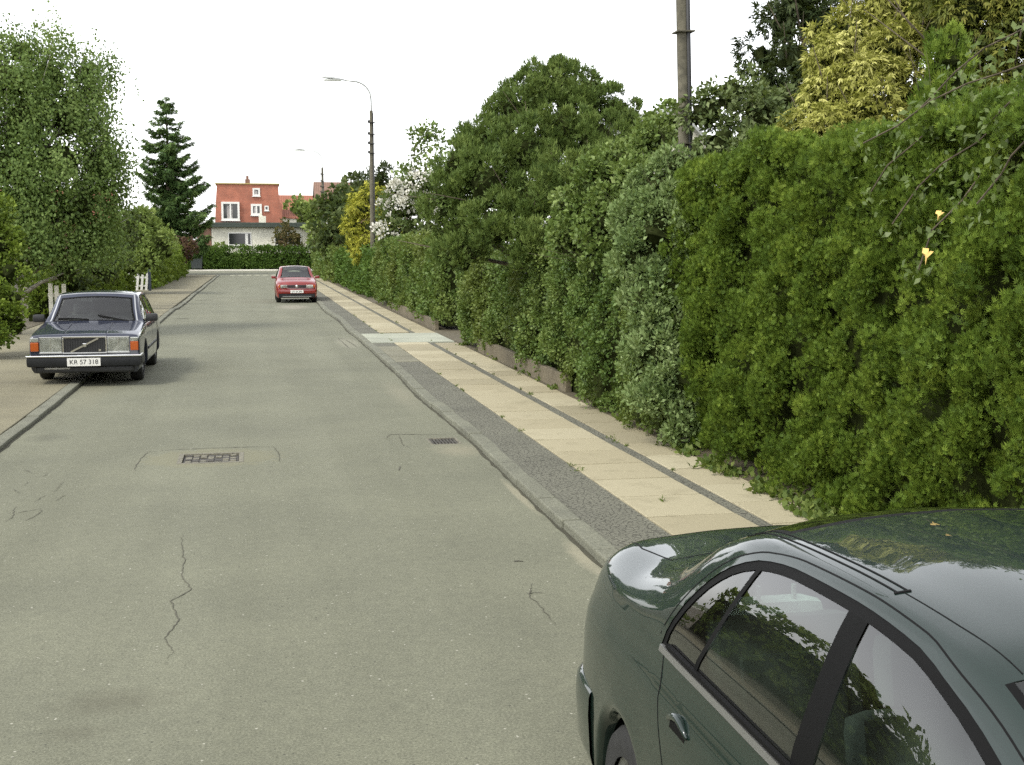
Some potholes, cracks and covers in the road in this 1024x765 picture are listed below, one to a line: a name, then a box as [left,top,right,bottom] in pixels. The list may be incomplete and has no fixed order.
crack [164,536,192,663]
drain grate [426,437,462,445]
